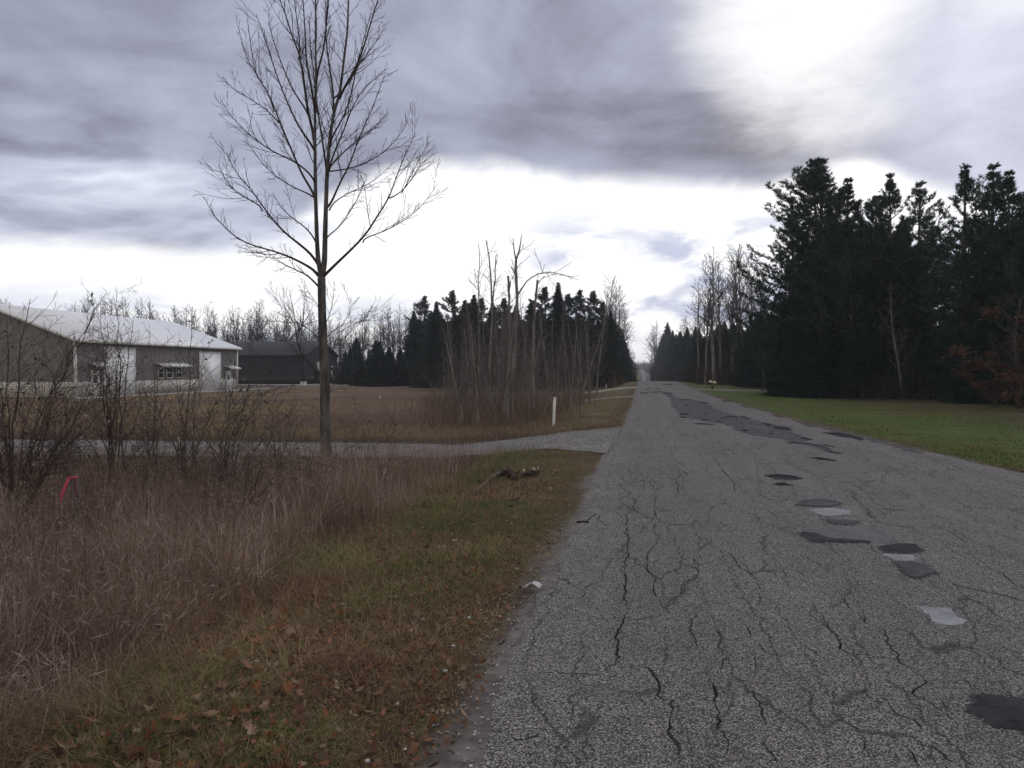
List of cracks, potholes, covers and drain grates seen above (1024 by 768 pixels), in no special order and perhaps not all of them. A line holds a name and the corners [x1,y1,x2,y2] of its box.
crack [544,467,761,763]
crack [746,627,778,765]
crack [777,542,967,766]
